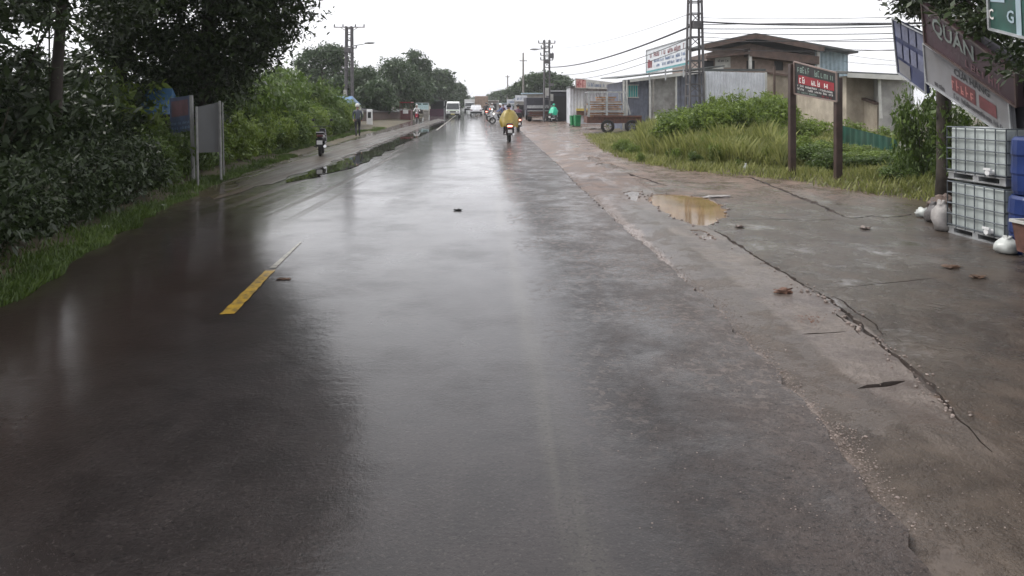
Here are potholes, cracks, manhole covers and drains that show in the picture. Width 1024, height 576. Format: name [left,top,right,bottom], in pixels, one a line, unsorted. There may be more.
crack [709,177,992,452]
